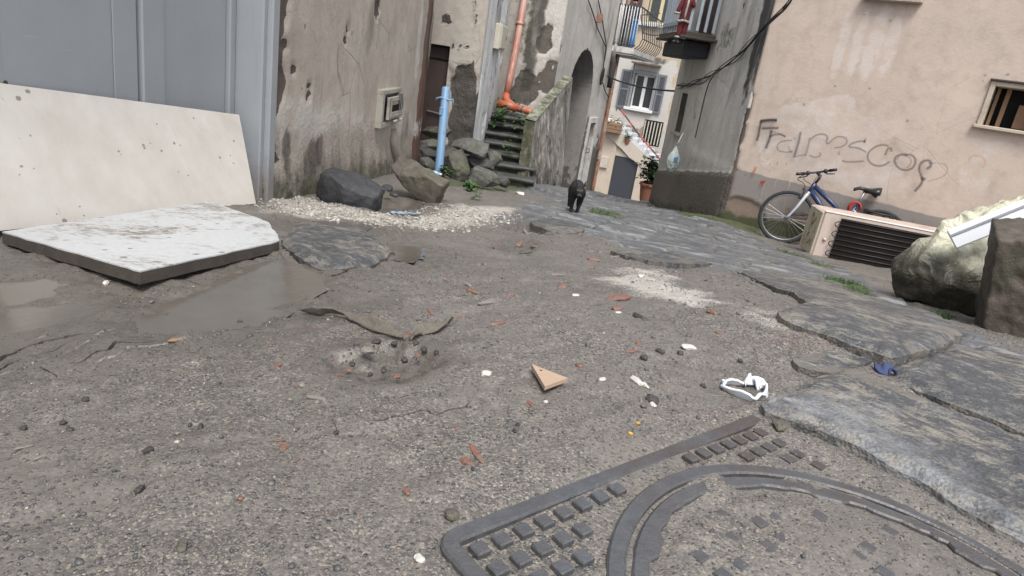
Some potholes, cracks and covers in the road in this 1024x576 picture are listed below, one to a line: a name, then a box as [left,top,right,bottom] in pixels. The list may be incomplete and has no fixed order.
manhole cover [440,412,1024,576]
pothole [292,334,466,398]
crack [331,387,503,436]
crack [728,269,788,296]
crack [0,321,204,377]
